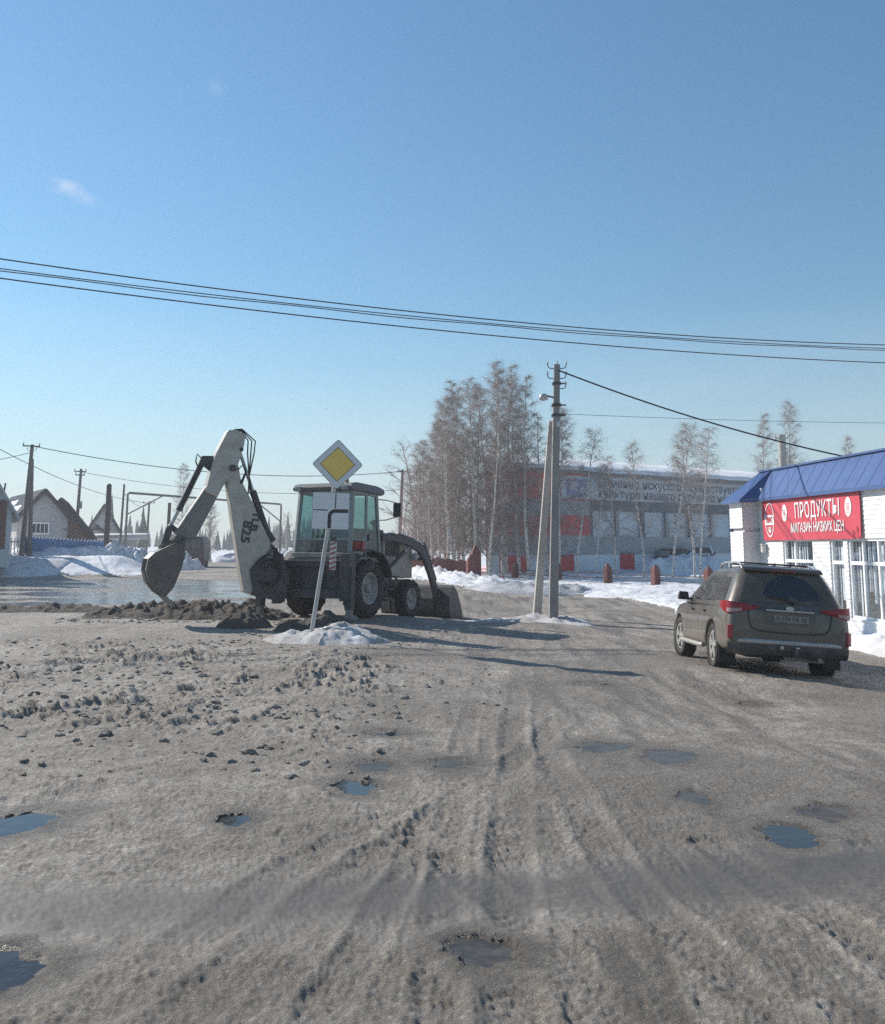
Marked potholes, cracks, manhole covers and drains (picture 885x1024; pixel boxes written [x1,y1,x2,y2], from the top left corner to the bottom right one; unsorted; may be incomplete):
pothole [736,815,849,859]
pothole [0,933,85,1000]
pothole [405,754,487,776]
pothole [422,924,545,978]
pothole [622,746,721,771]
pothole [335,755,404,775]
pothole [556,738,646,760]
pothole [207,810,265,831]
pothole [0,804,94,843]
pothole [317,774,391,800]
pothole [771,796,875,830]
pothole [664,784,729,811]
